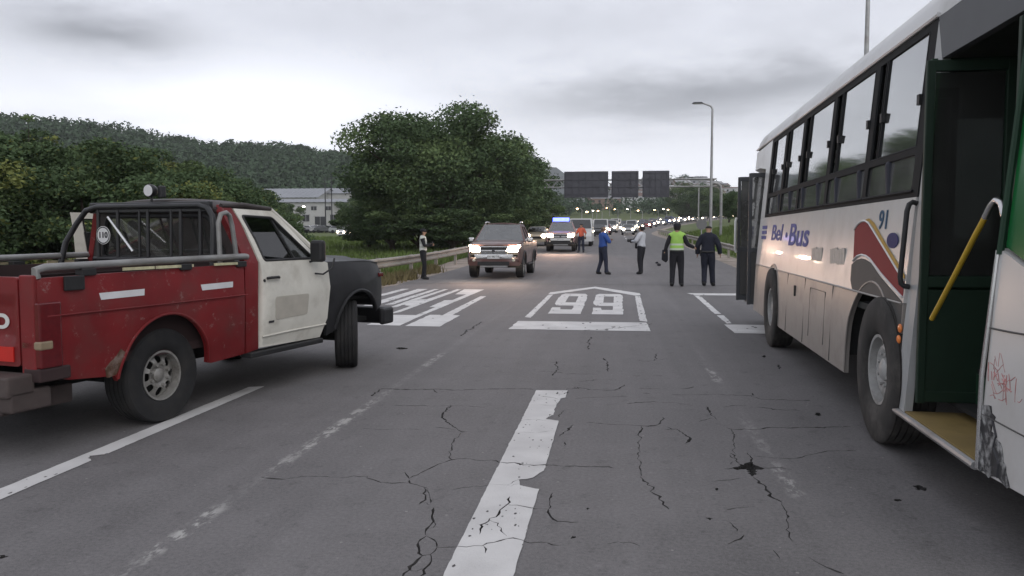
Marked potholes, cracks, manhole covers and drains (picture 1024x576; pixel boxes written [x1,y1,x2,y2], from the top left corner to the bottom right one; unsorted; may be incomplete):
crack [262,324,855,576]
